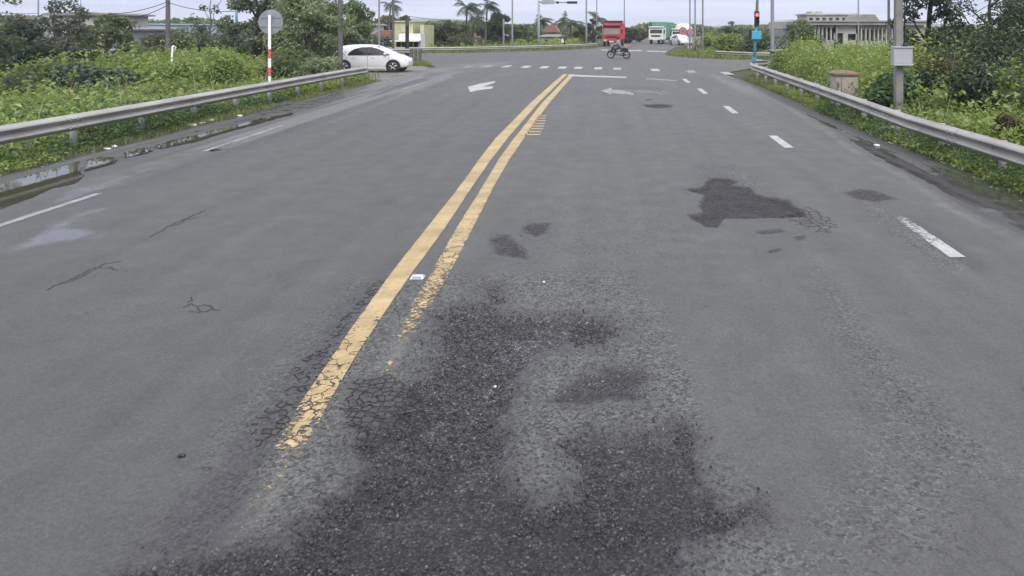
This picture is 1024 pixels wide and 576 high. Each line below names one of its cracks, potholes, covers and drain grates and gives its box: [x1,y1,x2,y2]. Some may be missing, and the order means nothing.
crack [337,374,445,449]
crack [183,297,218,313]
crack [150,210,206,237]
crack [47,261,121,290]
crack [783,208,838,233]
crack [250,280,385,448]
